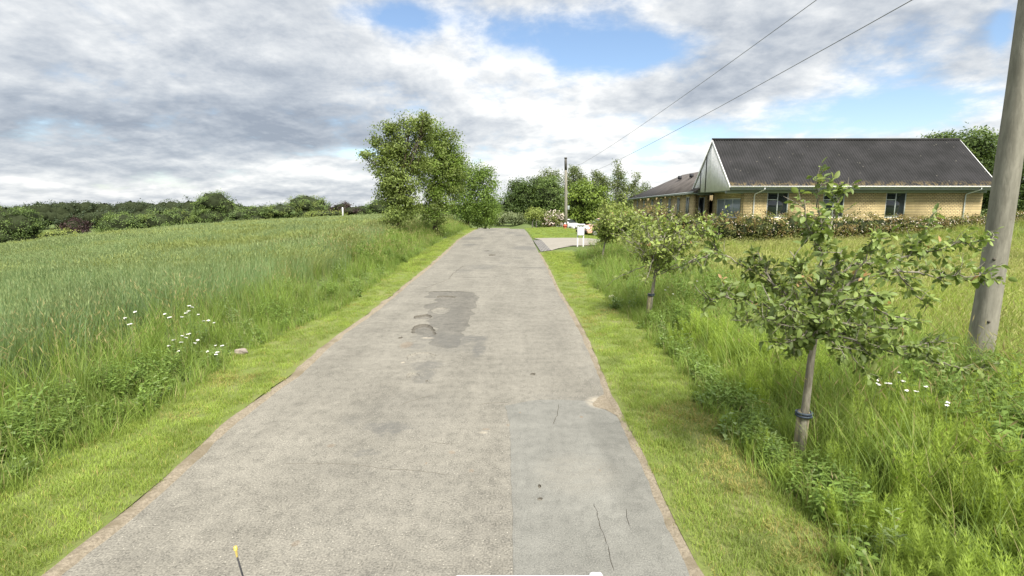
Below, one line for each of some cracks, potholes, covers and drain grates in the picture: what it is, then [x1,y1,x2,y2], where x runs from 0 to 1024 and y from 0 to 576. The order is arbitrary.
pothole [411,324,438,336]
crack [286,463,446,475]
